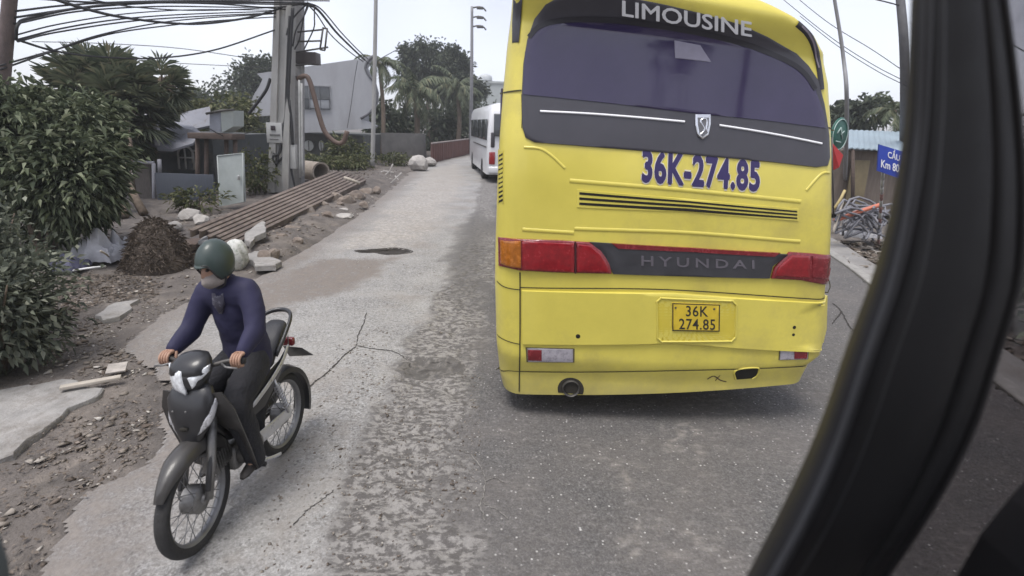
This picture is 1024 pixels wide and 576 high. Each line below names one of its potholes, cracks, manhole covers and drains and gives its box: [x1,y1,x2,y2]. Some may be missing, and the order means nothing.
crack [832,303,852,329]
crack [461,450,509,520]
pothole [354,247,413,255]
